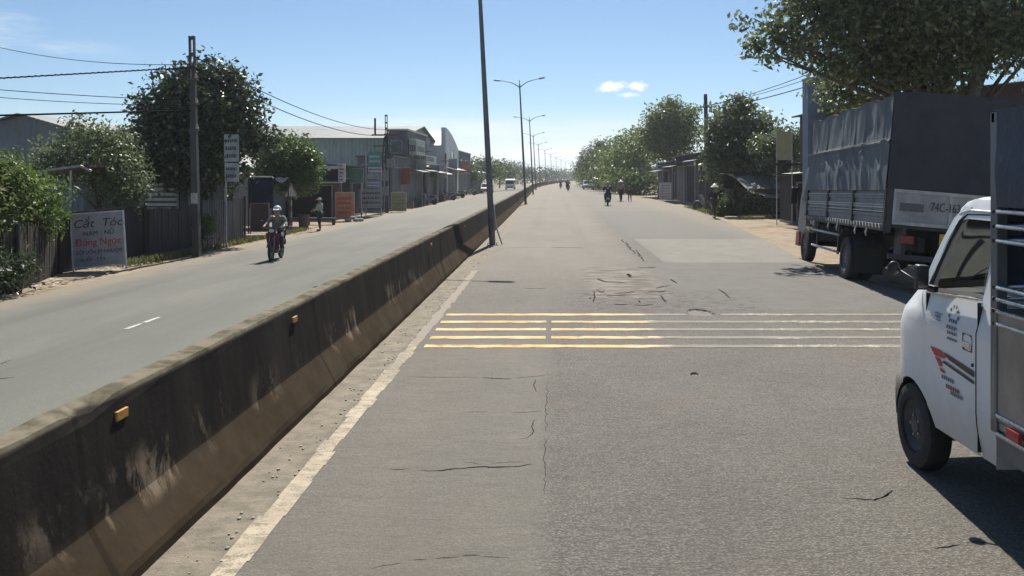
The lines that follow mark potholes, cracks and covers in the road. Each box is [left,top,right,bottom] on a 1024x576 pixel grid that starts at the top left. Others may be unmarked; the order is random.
crack [491,375,544,439]
crack [371,555,506,569]
crack [393,462,531,471]
crack [588,240,677,306]
crack [847,490,893,501]
